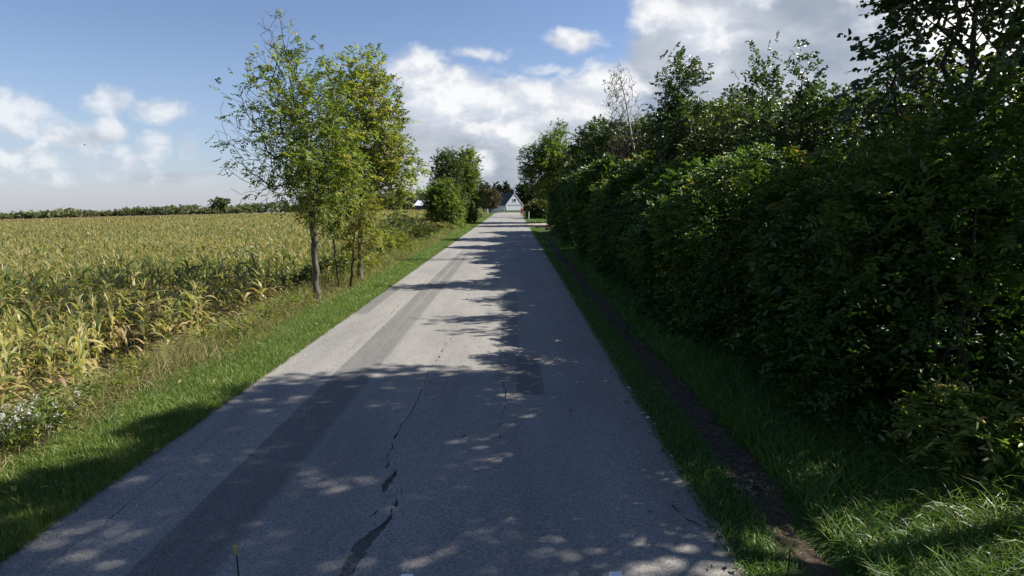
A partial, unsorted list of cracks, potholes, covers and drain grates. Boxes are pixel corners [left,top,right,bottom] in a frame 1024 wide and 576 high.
crack [385,338,451,468]
